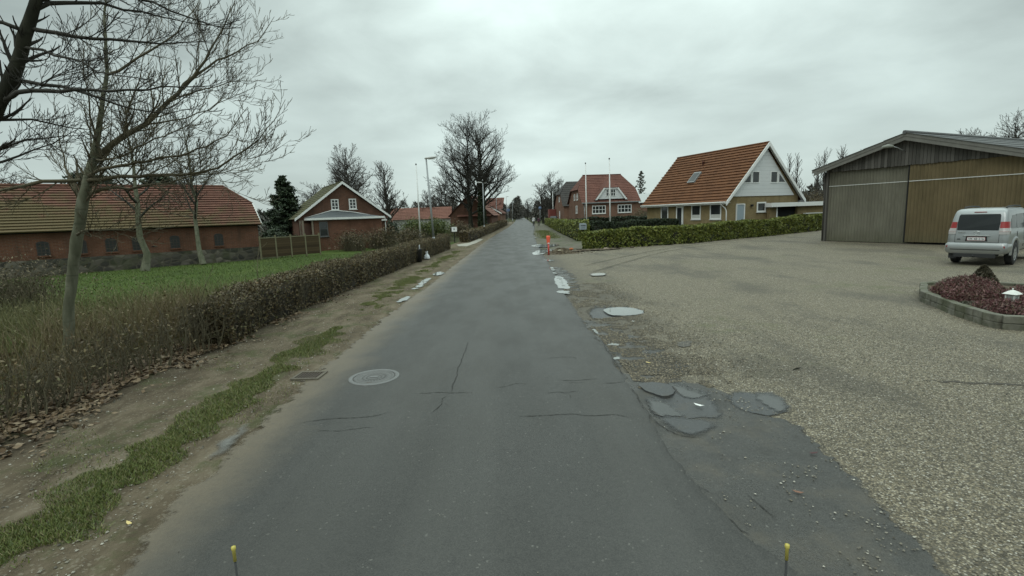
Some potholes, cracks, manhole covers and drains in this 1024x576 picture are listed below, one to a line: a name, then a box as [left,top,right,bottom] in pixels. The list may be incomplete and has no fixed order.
crack [432,343,468,410]
manhole cover [348,369,399,386]
drain grate [290,371,328,382]
